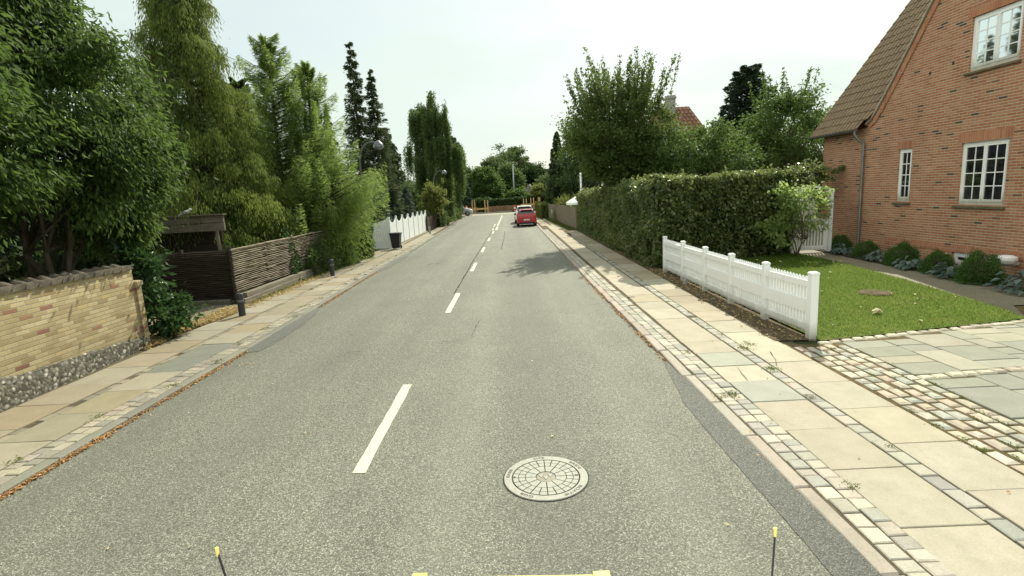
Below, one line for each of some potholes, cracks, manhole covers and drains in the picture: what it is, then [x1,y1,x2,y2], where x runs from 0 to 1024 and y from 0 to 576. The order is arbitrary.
manhole cover [503,456,589,502]
